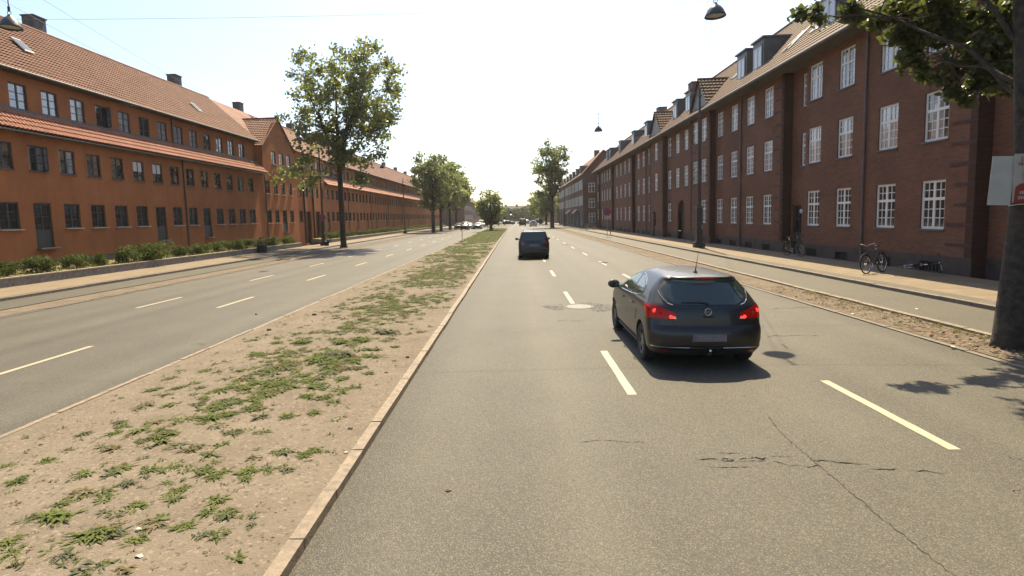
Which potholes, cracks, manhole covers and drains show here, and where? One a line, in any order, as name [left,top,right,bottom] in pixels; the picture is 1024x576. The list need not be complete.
crack [698,452,870,468]
